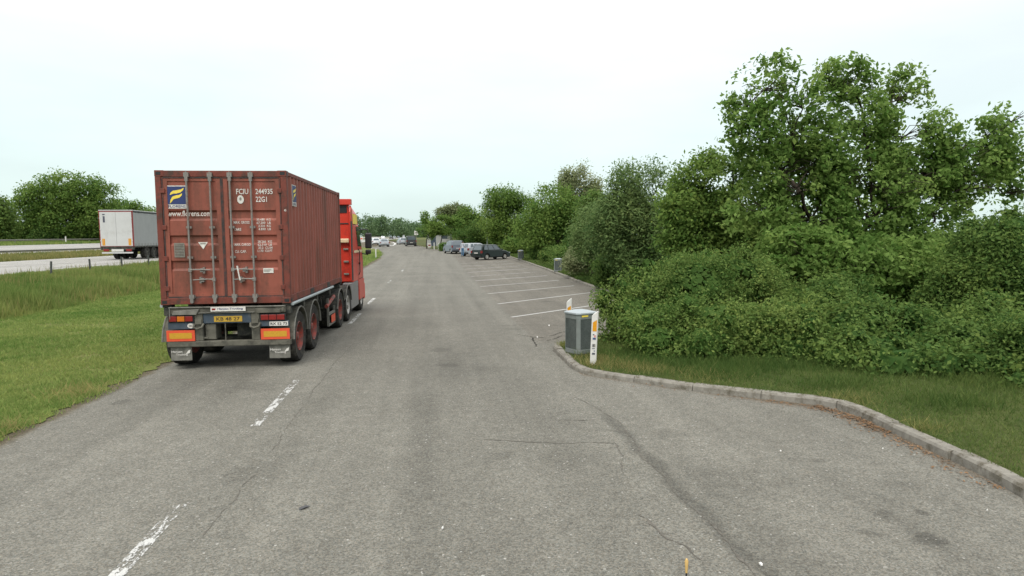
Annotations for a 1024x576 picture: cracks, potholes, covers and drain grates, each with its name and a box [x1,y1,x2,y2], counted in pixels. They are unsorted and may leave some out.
crack [485,439,624,474]
crack [640,515,701,560]
